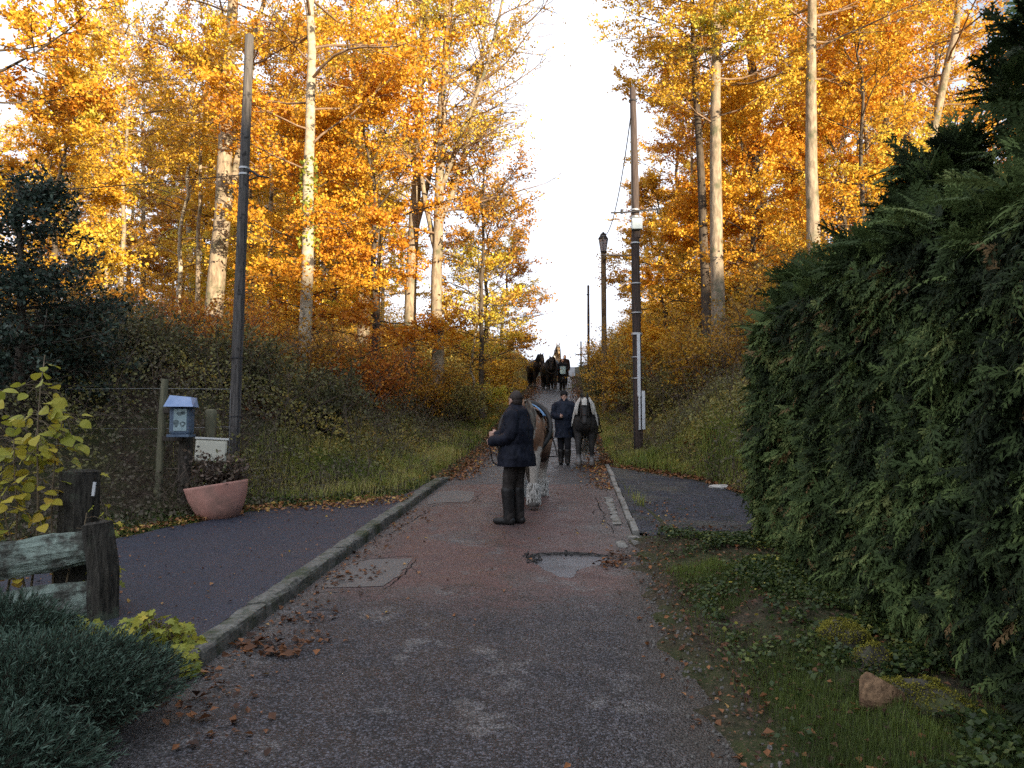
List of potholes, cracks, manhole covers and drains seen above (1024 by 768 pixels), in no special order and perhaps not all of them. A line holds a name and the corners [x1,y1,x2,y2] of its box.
crack [592,498,614,533]
pothole [522,550,610,578]
